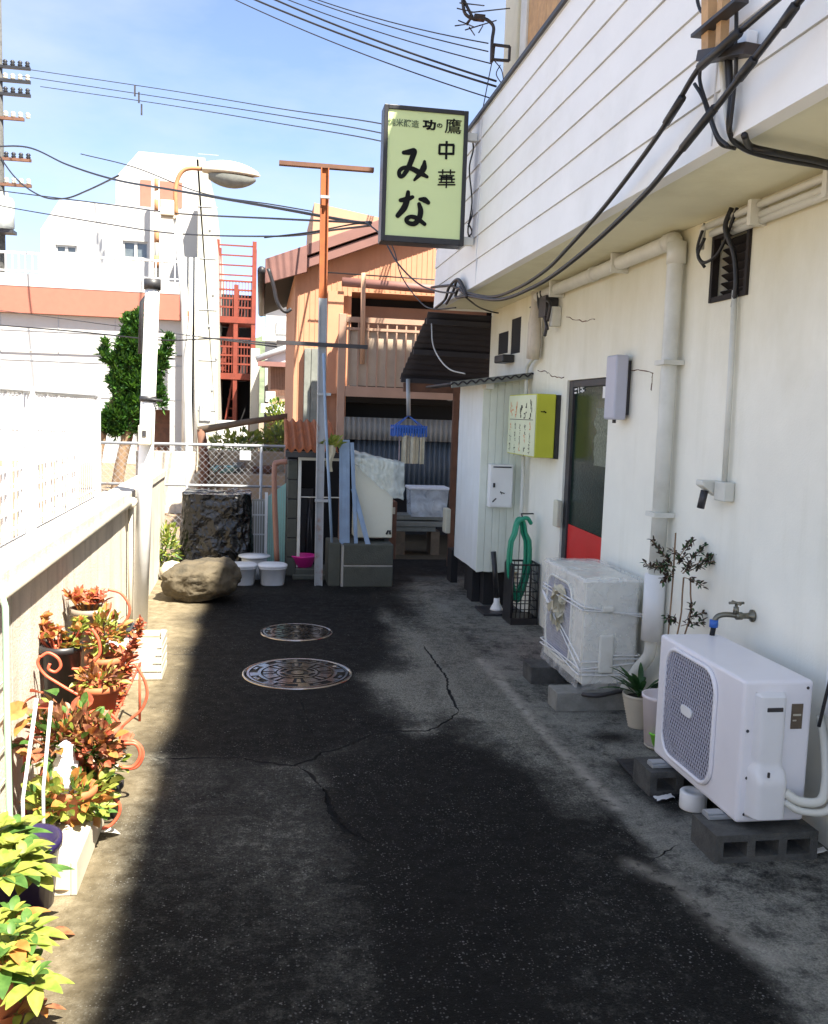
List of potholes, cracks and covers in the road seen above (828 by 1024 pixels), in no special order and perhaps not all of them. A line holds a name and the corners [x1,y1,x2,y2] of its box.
manhole cover [242,658,352,690]
manhole cover [260,623,333,641]
crack [157,646,477,785]
